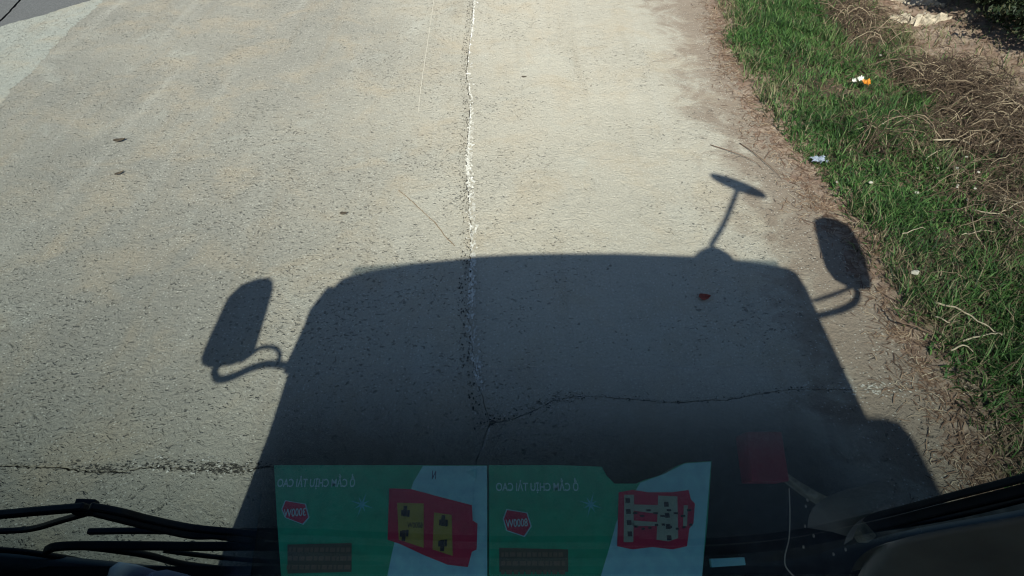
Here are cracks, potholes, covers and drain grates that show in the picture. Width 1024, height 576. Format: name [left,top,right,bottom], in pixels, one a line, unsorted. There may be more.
crack [398,0,935,457]
crack [1,456,281,477]
